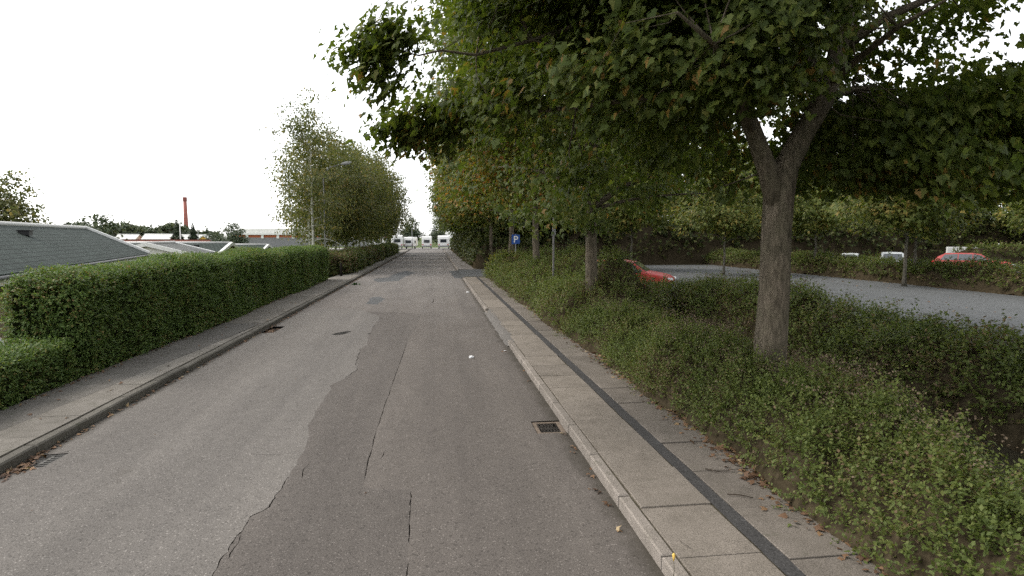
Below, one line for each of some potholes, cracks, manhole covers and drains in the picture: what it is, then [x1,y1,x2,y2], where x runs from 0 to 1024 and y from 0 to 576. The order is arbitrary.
crack [212,464,309,576]
